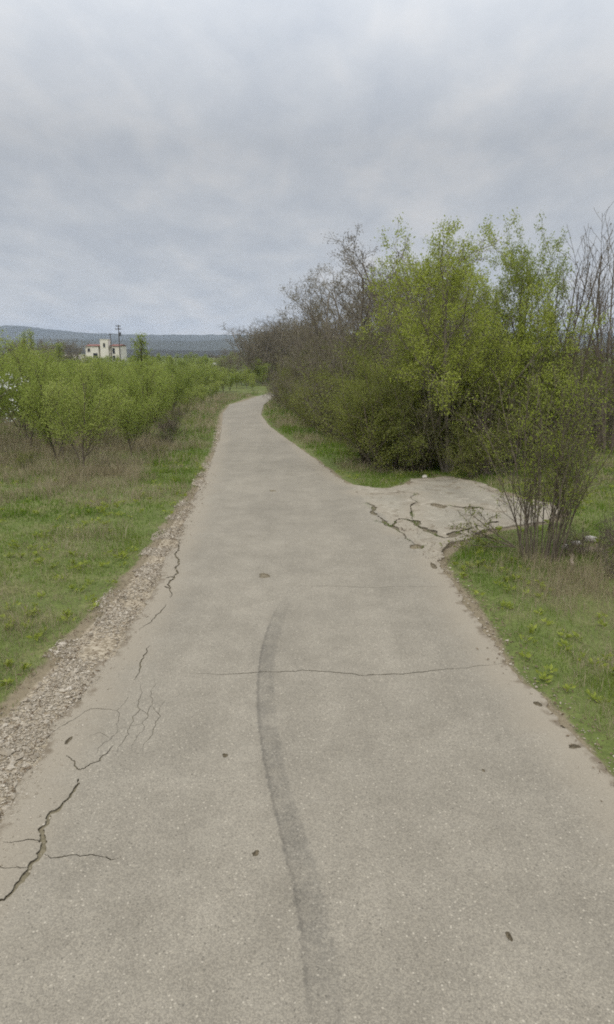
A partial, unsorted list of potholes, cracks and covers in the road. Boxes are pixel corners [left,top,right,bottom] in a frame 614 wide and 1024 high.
crack [190,664,496,676]
crack [146,540,180,625]
crack [1,648,163,901]
crack [393,492,498,538]
